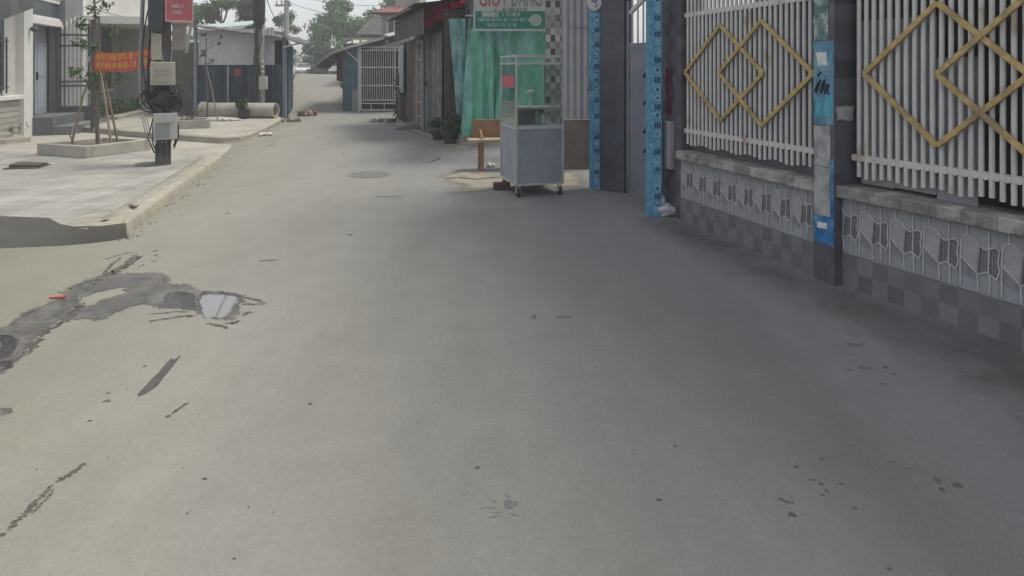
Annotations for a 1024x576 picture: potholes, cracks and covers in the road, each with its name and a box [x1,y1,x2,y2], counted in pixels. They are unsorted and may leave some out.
manhole cover [3,162,50,170]
manhole cover [346,170,394,178]
crack [7,462,87,531]
pothole [164,292,196,309]
crack [94,253,141,283]
pothole [0,361,14,371]
pothole [197,291,242,319]
